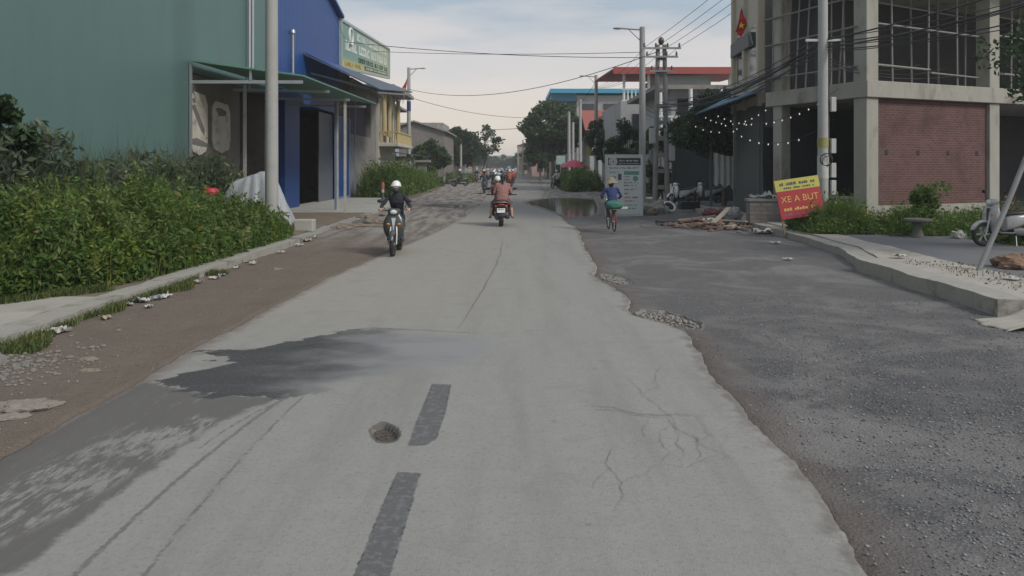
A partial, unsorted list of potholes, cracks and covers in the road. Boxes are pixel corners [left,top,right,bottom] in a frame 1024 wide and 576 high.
pothole [371,425,400,442]
crack [563,368,730,468]
pothole [633,309,706,330]
pothole [598,274,632,285]
